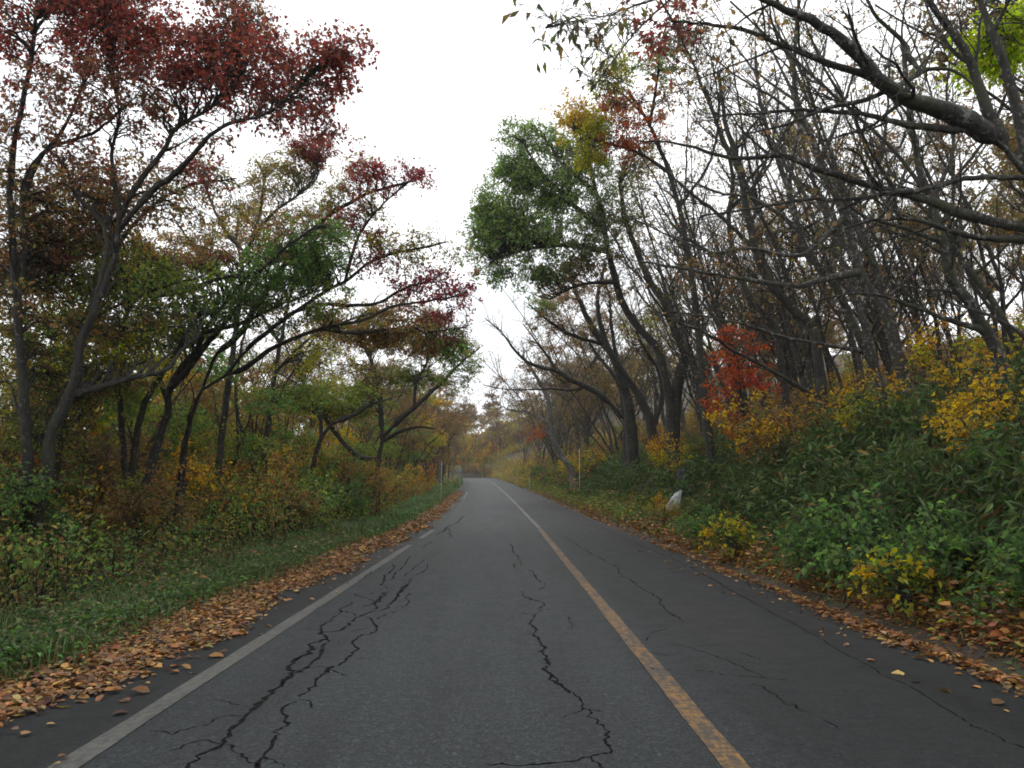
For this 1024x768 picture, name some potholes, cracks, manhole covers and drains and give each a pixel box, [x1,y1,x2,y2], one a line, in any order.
crack [564,536,838,728]
crack [159,517,463,768]
crack [488,544,613,768]
